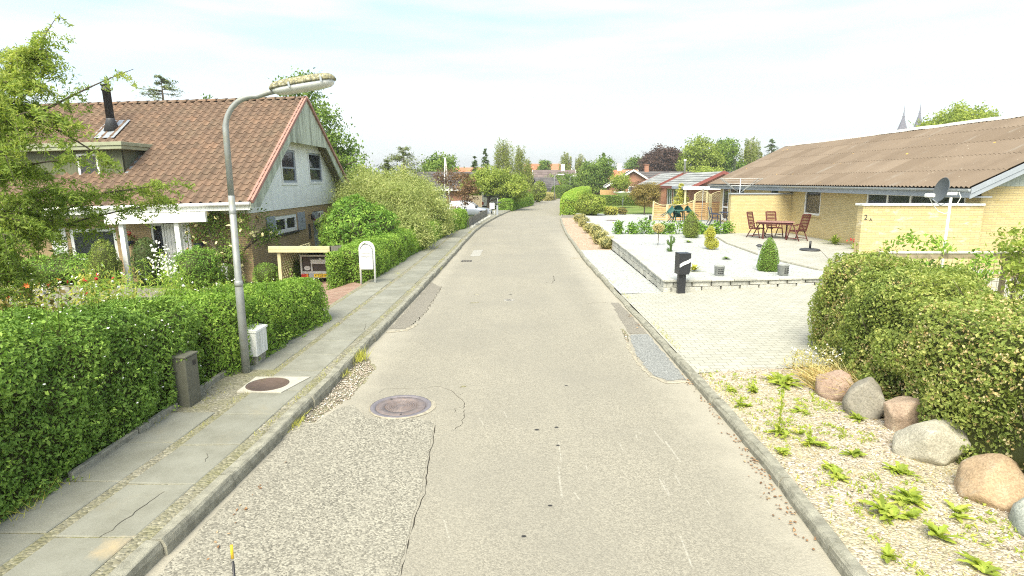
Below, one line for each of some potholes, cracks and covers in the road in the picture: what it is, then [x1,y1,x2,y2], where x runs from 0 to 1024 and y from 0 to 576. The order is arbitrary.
crack [380,386,465,432]
manhole cover [369,395,436,419]
manhole cover [237,377,311,393]
crack [401,427,435,574]
